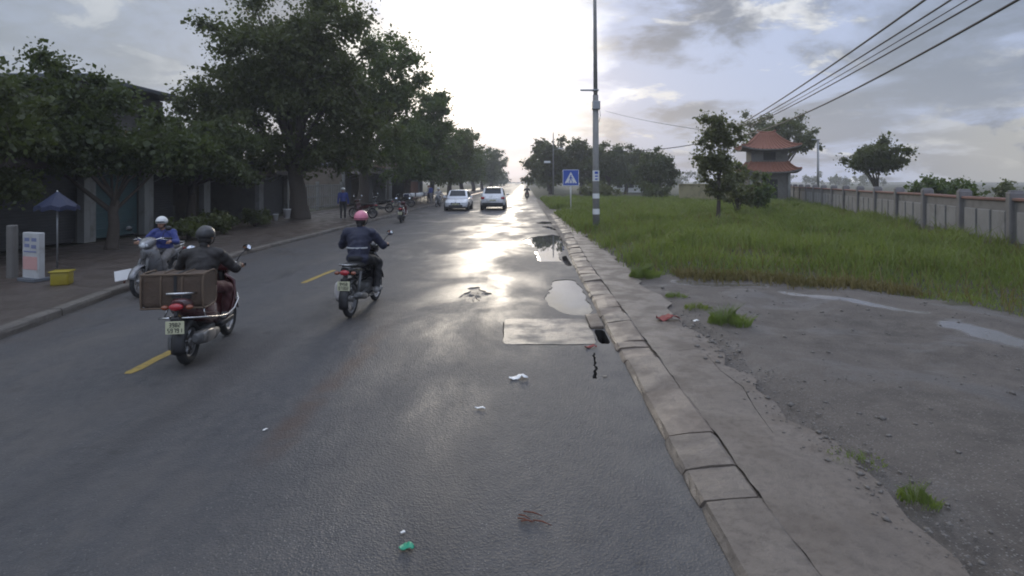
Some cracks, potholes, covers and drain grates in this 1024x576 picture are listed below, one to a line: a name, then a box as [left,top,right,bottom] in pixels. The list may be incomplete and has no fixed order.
pothole [459,287,492,302]
pothole [544,279,593,315]
drain grate [585,313,610,344]
